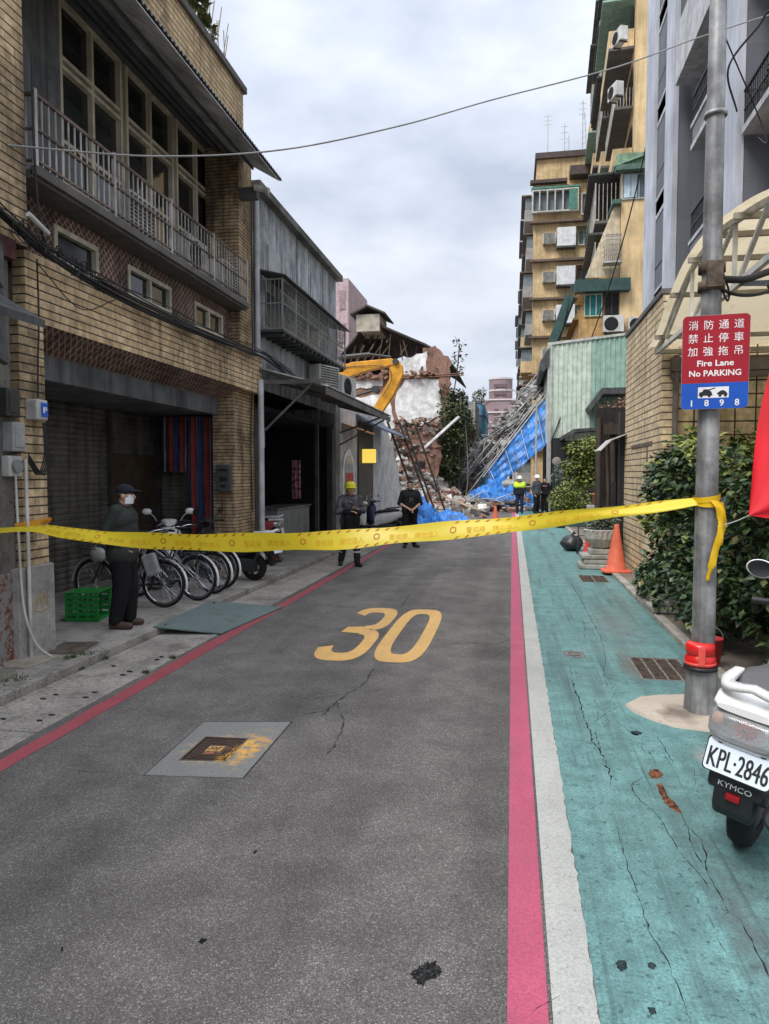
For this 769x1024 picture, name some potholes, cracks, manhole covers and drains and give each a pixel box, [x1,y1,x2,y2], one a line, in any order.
drain grate [577,575,611,583]
crack [291,669,374,754]
pothole [615,960,628,972]
crack [631,780,769,976]
manhole cover [145,722,291,779]
pothole [410,961,443,986]
crack [570,584,696,791]
manhole cover [563,650,585,658]
drain grate [628,657,686,684]
manhole cover [43,642,102,655]
